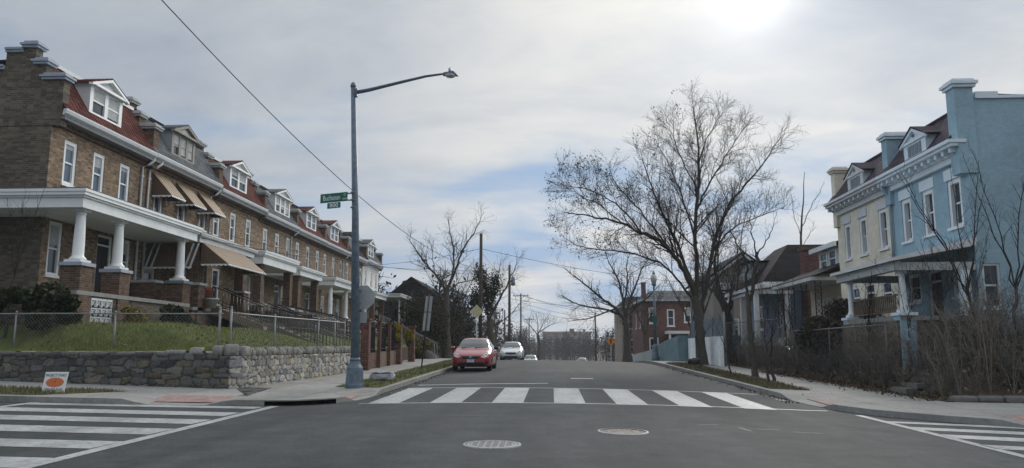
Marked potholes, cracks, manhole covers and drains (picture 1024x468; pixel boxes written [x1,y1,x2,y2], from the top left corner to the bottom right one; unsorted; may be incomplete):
manhole cover [463,440,522,449]
manhole cover [597,428,649,436]
